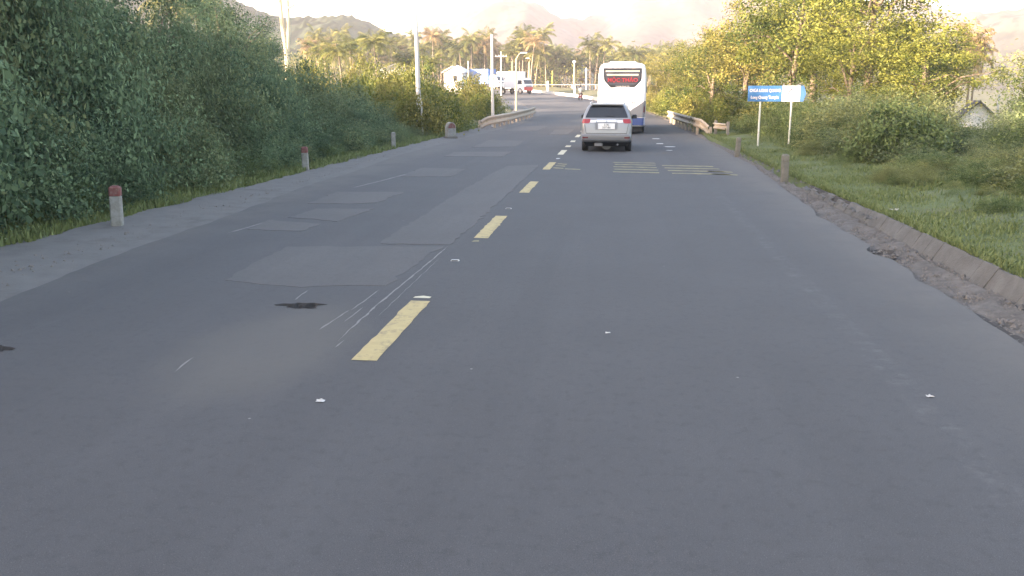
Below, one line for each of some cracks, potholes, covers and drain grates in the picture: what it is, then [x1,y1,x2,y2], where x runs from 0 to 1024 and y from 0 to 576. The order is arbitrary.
crack [295,245,449,347]
